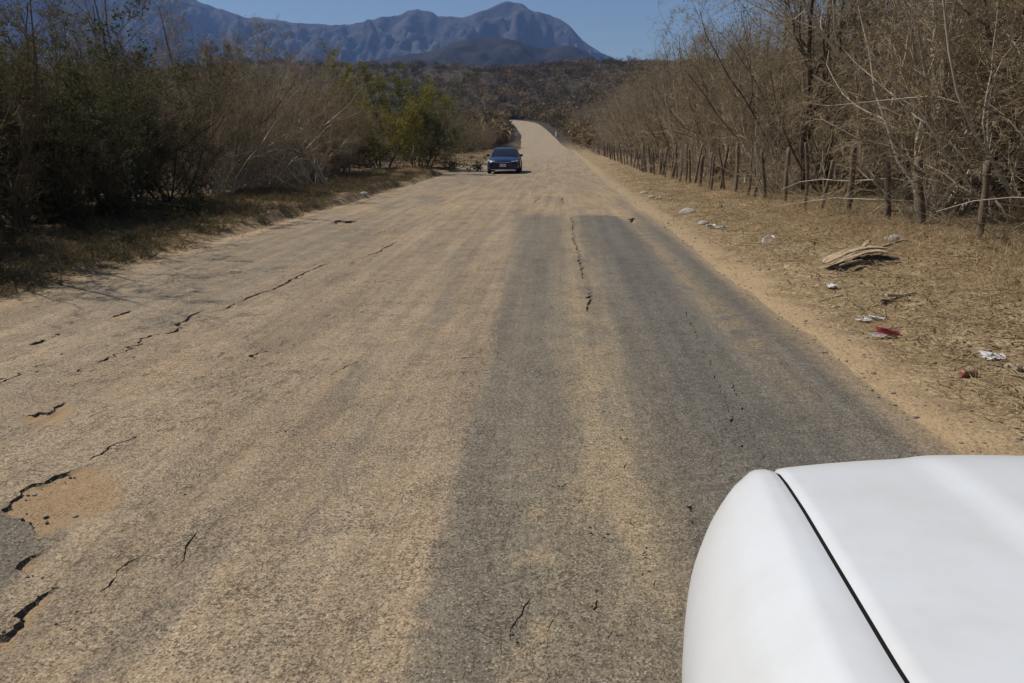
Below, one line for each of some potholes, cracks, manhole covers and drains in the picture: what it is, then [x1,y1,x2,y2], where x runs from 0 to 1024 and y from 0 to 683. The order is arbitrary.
pothole [0,457,153,542]
crack [170,532,197,572]
crack [534,198,617,312]
crack [88,438,134,461]
crack [500,564,560,657]
